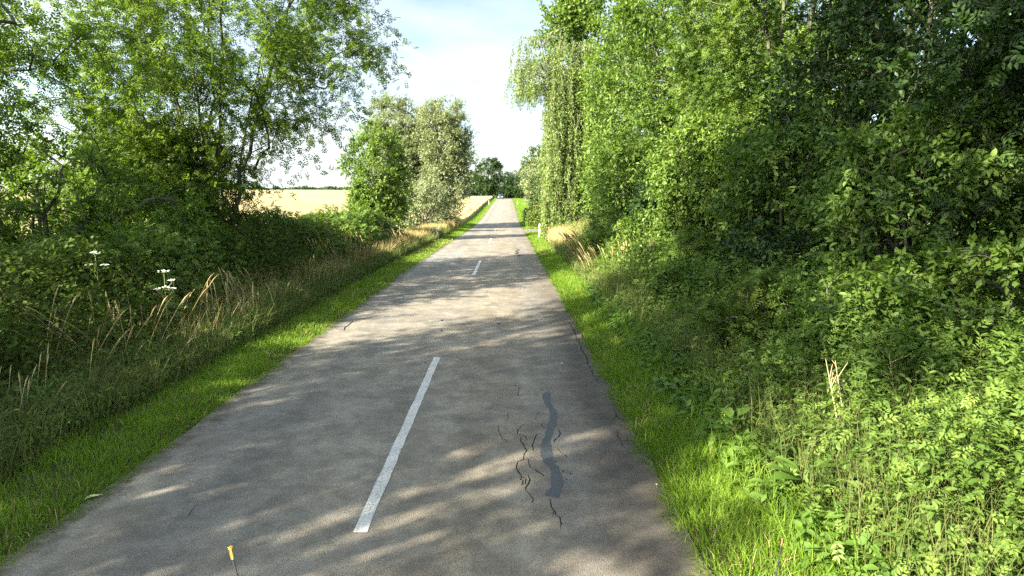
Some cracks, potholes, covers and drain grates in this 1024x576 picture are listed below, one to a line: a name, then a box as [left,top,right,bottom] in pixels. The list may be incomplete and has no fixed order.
crack [498,412,567,528]
crack [566,319,605,384]
